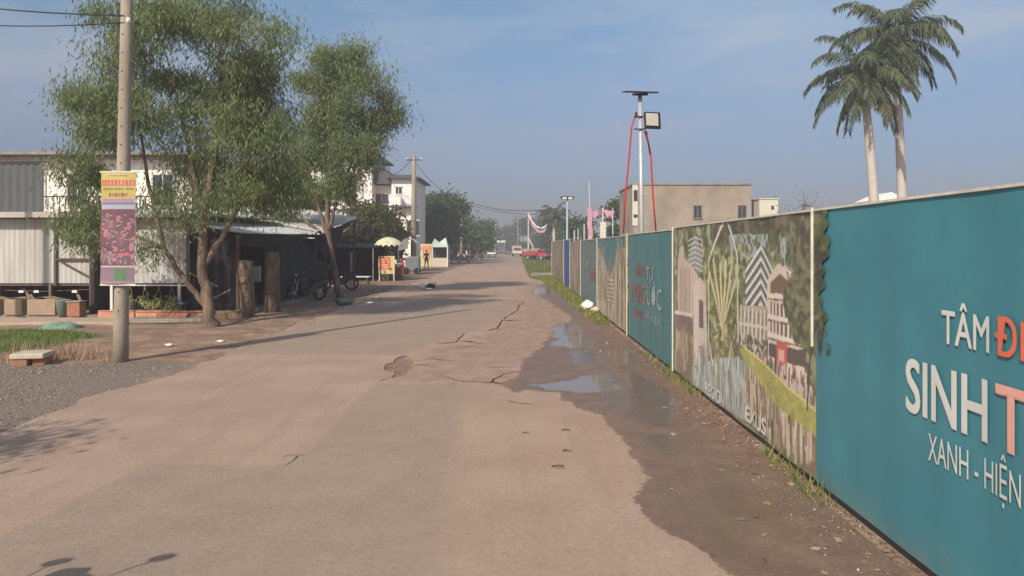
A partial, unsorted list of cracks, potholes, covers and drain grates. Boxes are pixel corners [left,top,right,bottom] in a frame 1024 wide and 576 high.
pothole [384,355,414,378]
crack [415,299,529,404]
